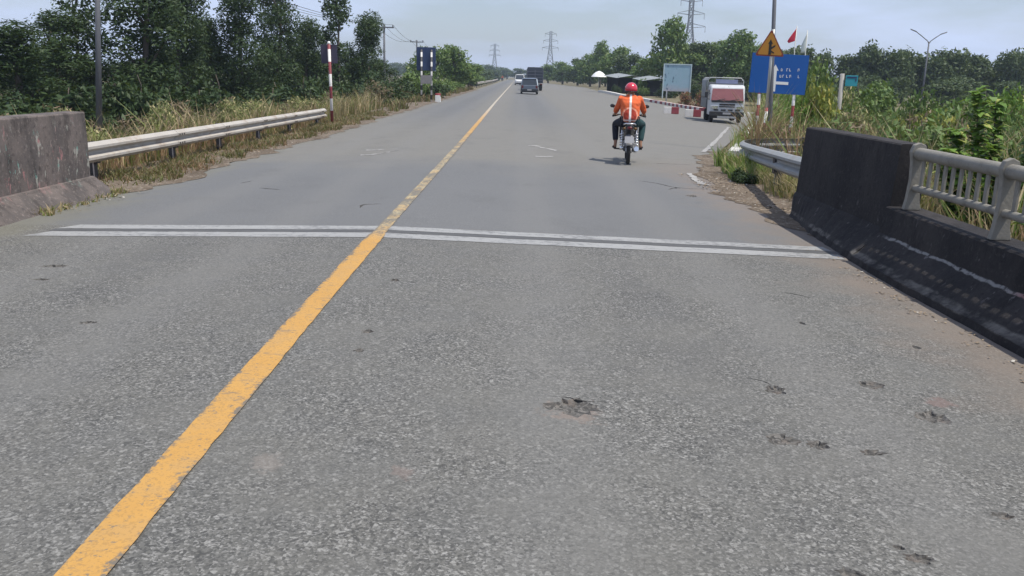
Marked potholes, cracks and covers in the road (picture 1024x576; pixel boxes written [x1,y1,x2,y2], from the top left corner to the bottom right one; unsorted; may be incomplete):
pothole [991,512,1015,520]
pothole [914,410,952,425]
pothole [766,433,802,446]
pothole [901,553,937,565]
pothole [806,440,830,450]
pothole [765,385,786,394]
pothole [859,381,885,390]
pothole [543,398,603,418]
